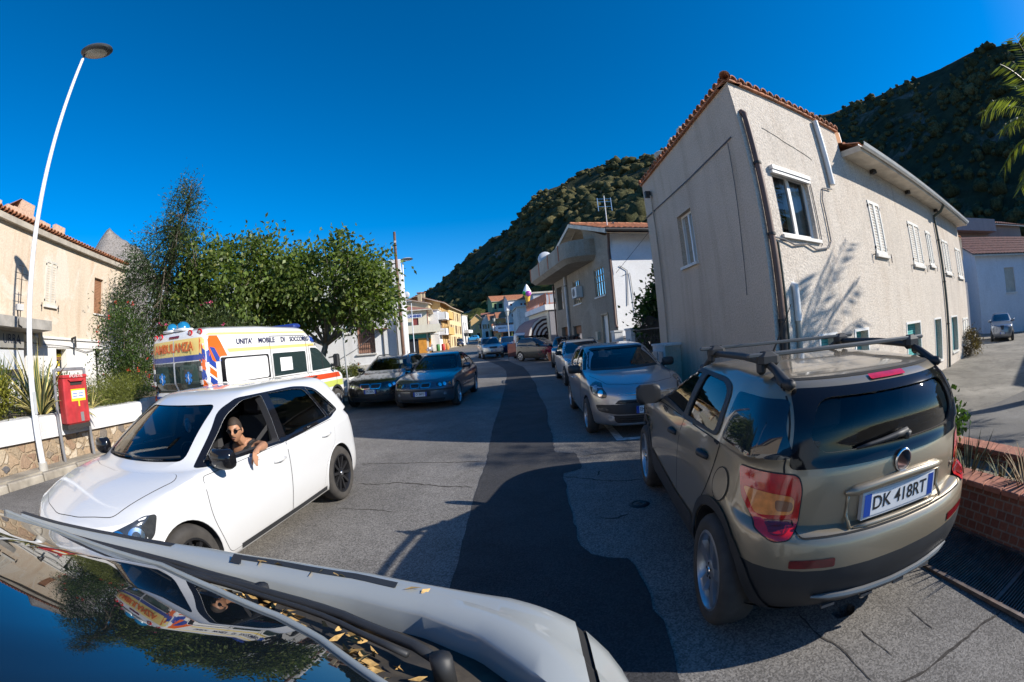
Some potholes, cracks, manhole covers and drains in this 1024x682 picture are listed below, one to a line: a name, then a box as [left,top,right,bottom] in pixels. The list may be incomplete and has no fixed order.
manhole cover [629,500,650,508]
crack [798,607,1001,682]
drain grate [922,524,1024,623]
